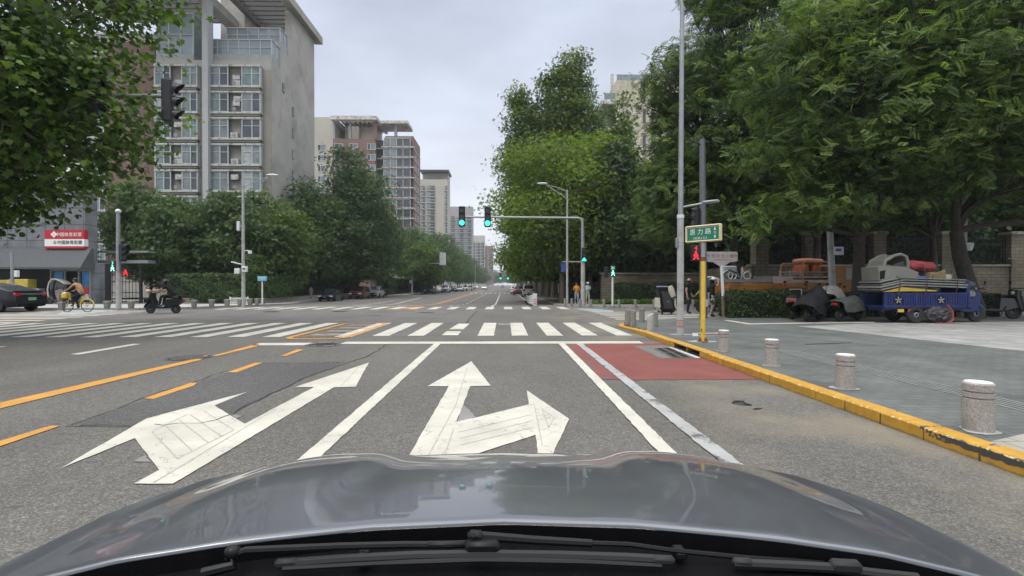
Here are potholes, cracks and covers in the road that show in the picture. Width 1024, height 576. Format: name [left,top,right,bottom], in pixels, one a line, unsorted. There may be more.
drain grate [654,347,692,358]
